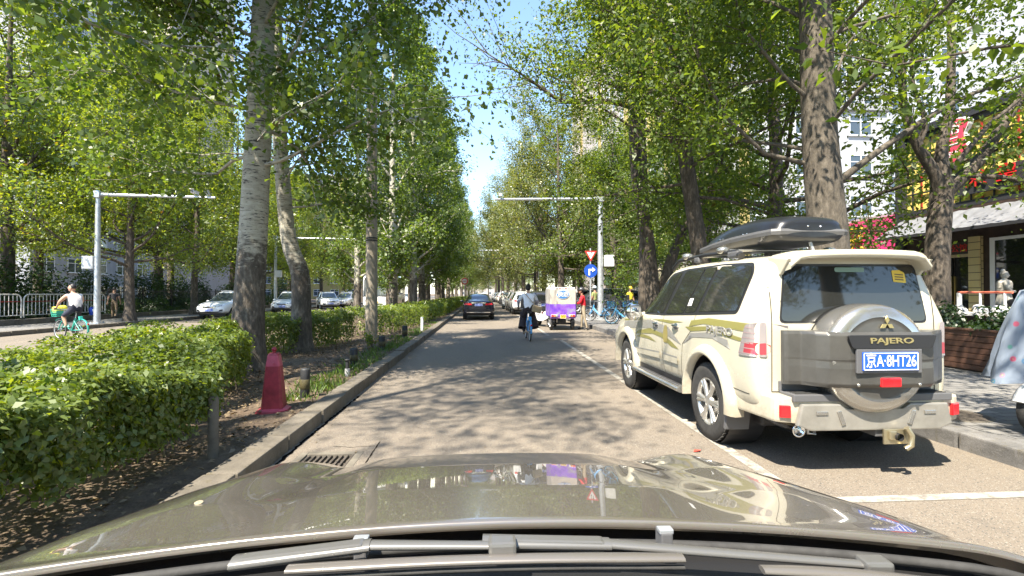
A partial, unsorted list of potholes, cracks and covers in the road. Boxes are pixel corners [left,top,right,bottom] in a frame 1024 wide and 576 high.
drain grate [292,451,364,467]
